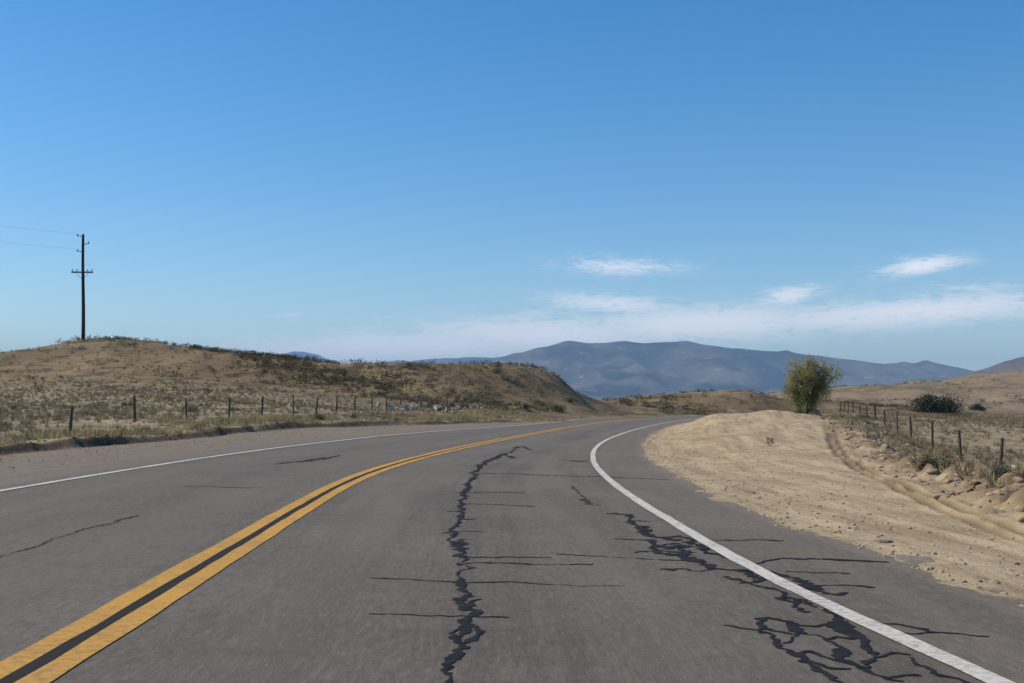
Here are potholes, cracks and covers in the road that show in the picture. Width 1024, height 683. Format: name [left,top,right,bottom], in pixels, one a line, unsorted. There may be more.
crack [278,455,340,464]
crack [880,622,990,637]
crack [571,486,600,506]
crack [0,515,139,557]
